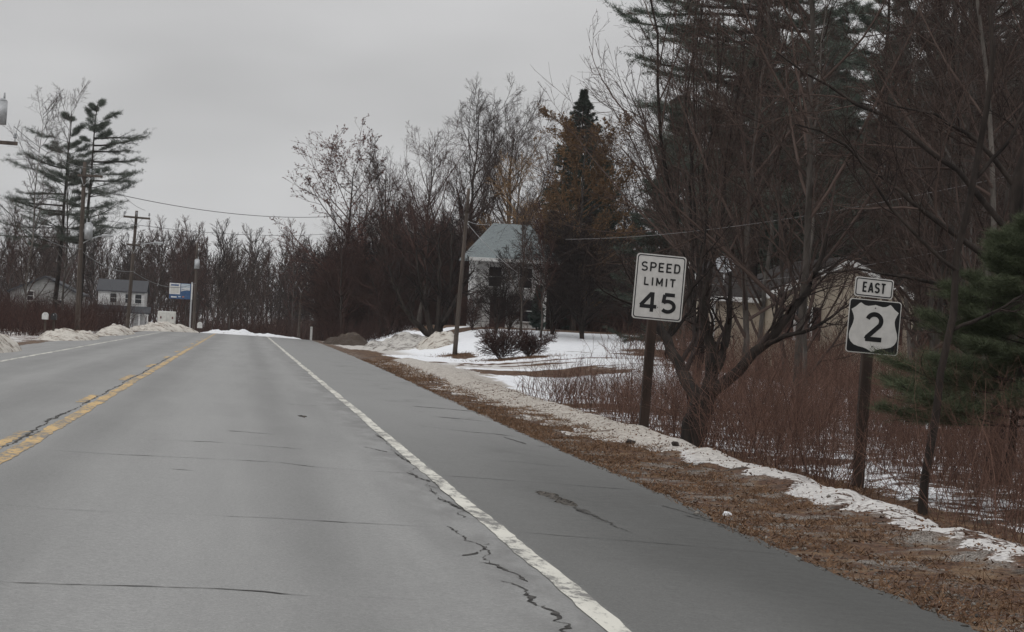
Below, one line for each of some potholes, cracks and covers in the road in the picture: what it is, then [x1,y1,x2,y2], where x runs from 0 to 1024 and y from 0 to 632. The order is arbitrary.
crack [41,431,399,473]
crack [540,507,777,554]
crack [448,526,572,632]
crack [18,582,421,600]
